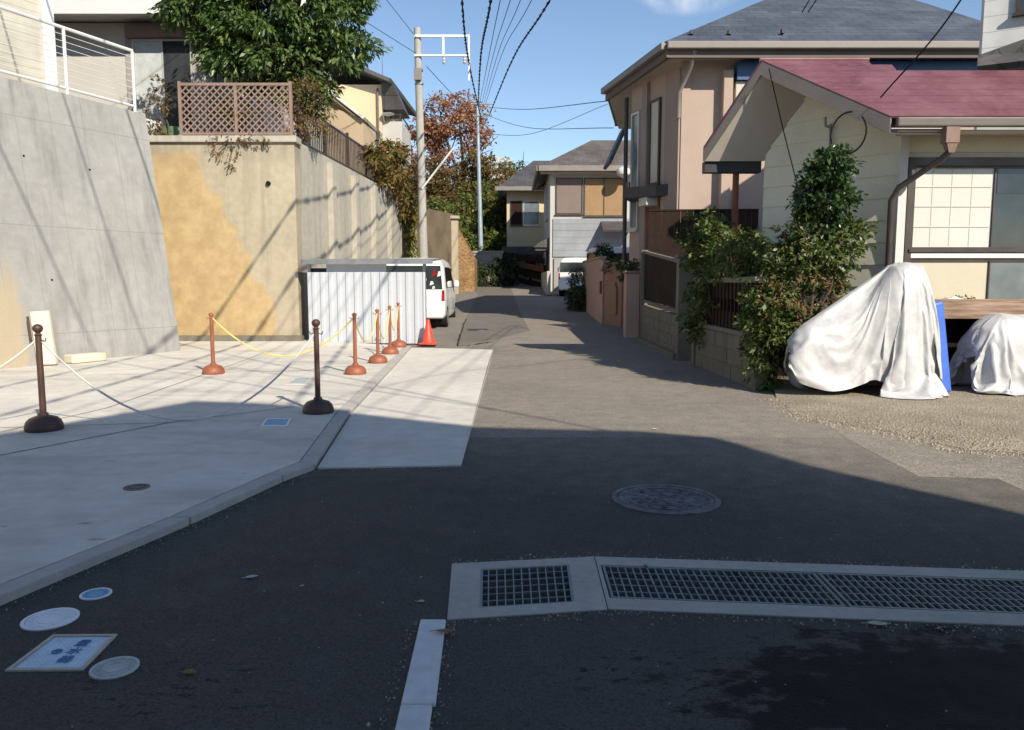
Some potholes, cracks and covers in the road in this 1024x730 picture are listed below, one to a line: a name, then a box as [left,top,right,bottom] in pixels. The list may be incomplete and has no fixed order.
drain grate [595,556,1024,627]
manhole cover [611,484,721,515]
utility cover [5,634,118,672]
utility cover [261,418,291,426]
utility cover [79,587,112,600]
utility cover [123,483,150,491]
utility cover [89,656,140,680]
drain grate [447,556,607,621]
utility cover [20,607,80,631]
utility cover [286,377,313,385]
